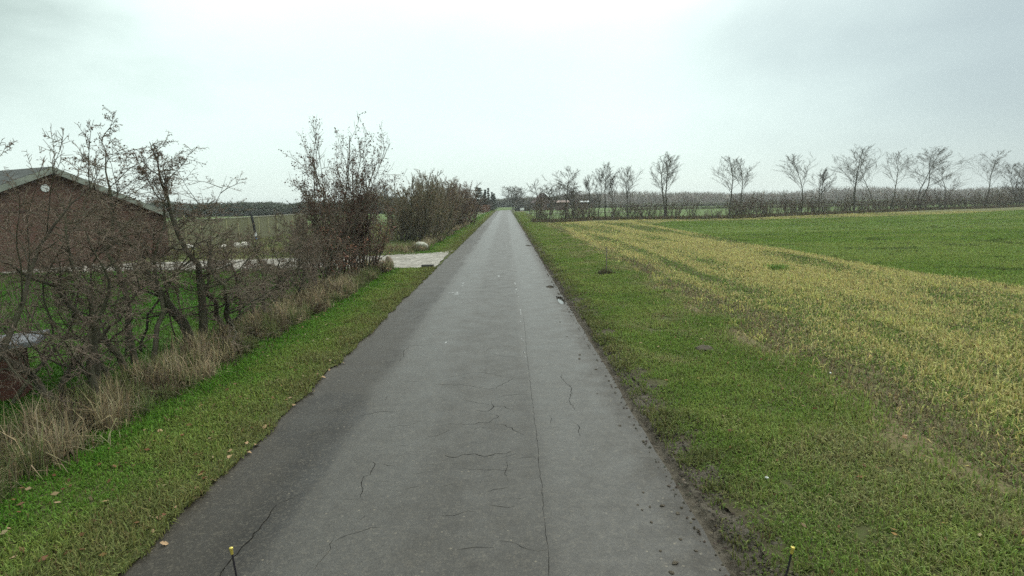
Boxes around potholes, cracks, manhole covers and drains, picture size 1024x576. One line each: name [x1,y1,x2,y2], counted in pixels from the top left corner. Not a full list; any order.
crack [220,495,298,576]
crack [315,356,535,568]
